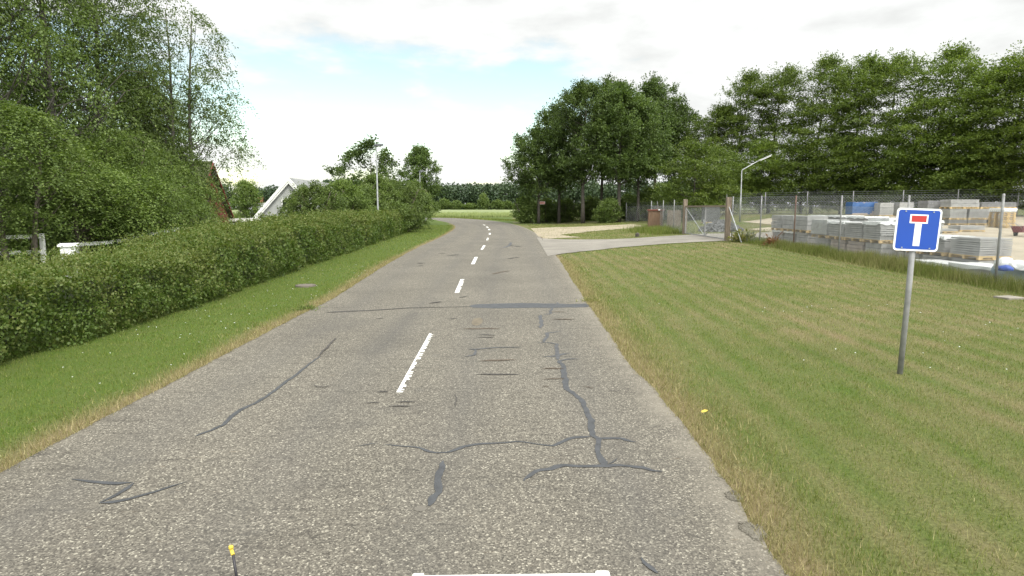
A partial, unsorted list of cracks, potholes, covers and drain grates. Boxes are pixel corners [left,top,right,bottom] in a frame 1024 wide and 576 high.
crack [368,391,415,406]
crack [481,359,520,375]
